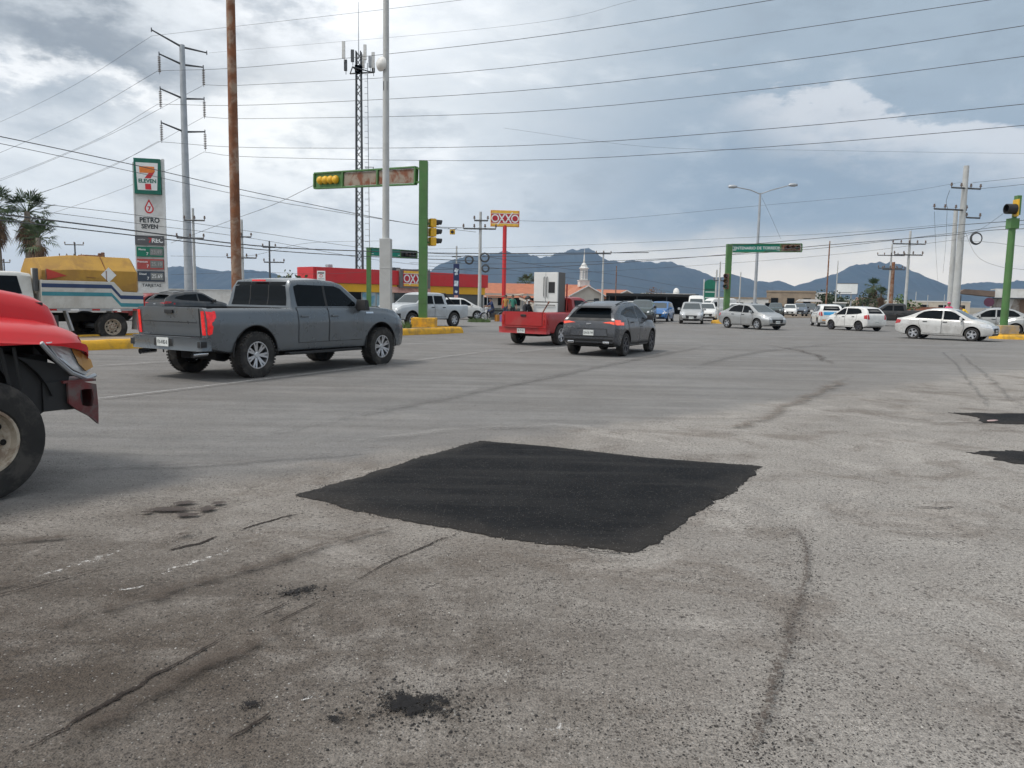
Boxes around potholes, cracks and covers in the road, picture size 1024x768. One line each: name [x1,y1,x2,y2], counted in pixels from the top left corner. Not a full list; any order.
pothole [277,583,319,597]
pothole [365,686,471,722]
crack [12,625,272,753]
crack [171,536,217,550]
